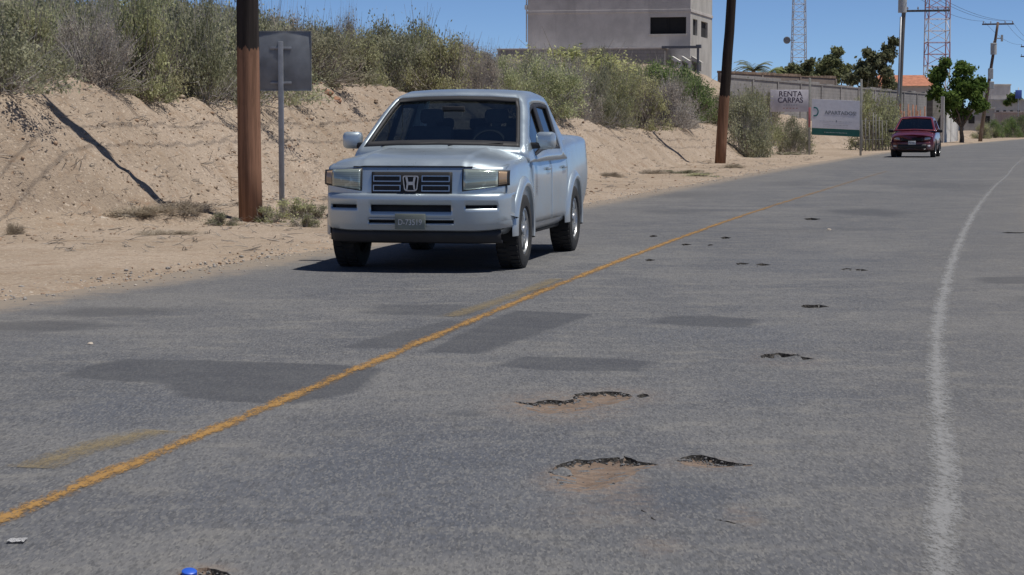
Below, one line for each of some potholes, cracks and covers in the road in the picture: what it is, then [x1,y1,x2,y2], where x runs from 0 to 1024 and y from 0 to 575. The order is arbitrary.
pothole [677,455,753,468]
pothole [515,391,633,414]
pothole [759,353,814,362]
pothole [548,456,658,491]
